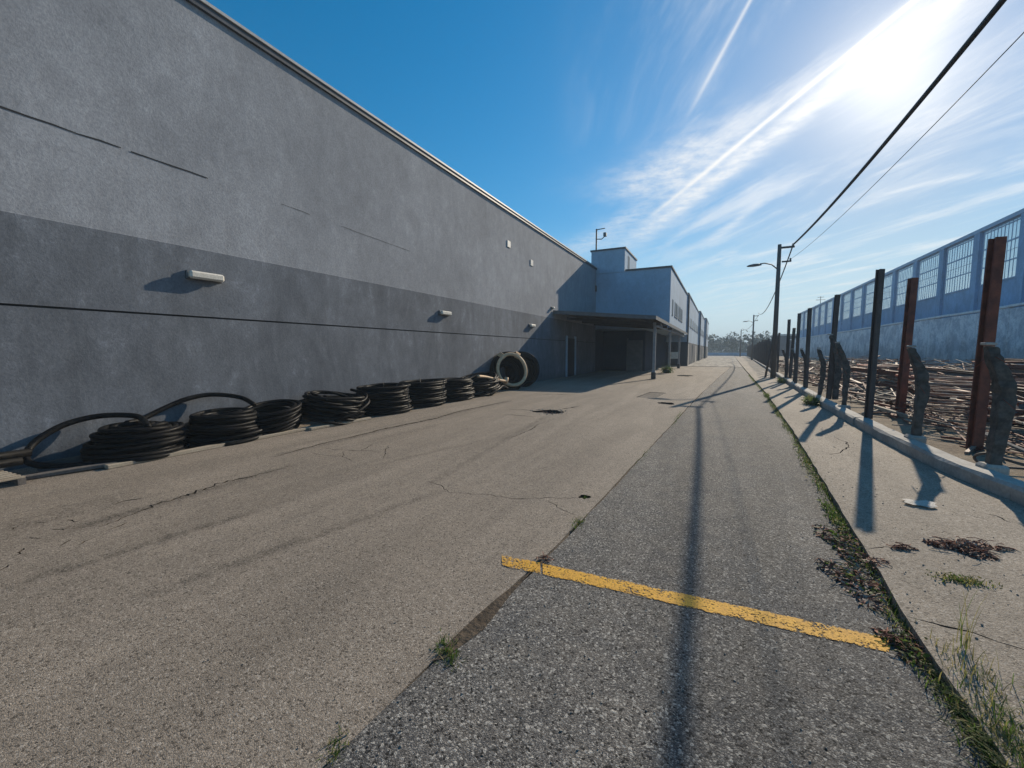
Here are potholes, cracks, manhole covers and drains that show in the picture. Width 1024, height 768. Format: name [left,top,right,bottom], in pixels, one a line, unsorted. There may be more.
crack [431,482,583,513]
crack [1,469,278,570]
crack [275,401,508,461]
